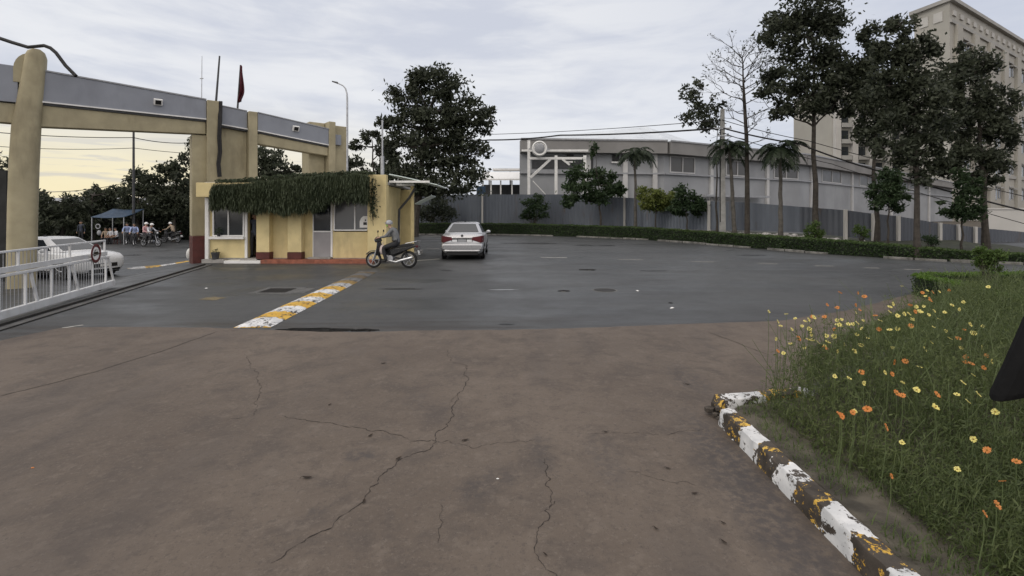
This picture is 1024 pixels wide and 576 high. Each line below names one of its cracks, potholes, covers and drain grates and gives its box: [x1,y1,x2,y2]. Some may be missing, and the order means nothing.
crack [534,459,557,576]
crack [271,351,535,563]
